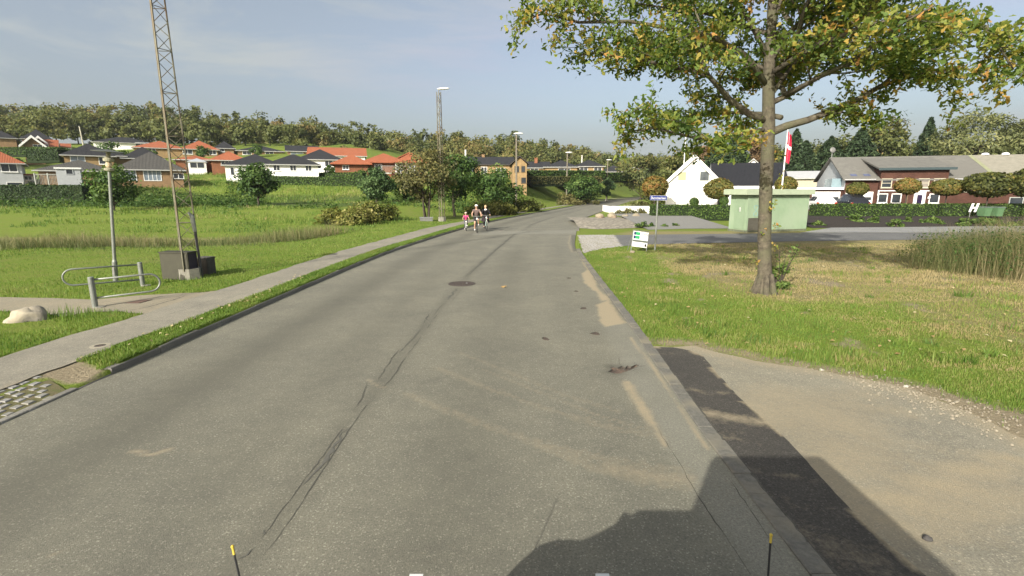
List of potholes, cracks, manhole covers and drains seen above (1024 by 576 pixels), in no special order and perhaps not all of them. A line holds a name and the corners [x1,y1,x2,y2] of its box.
pothole [608,364,639,374]
